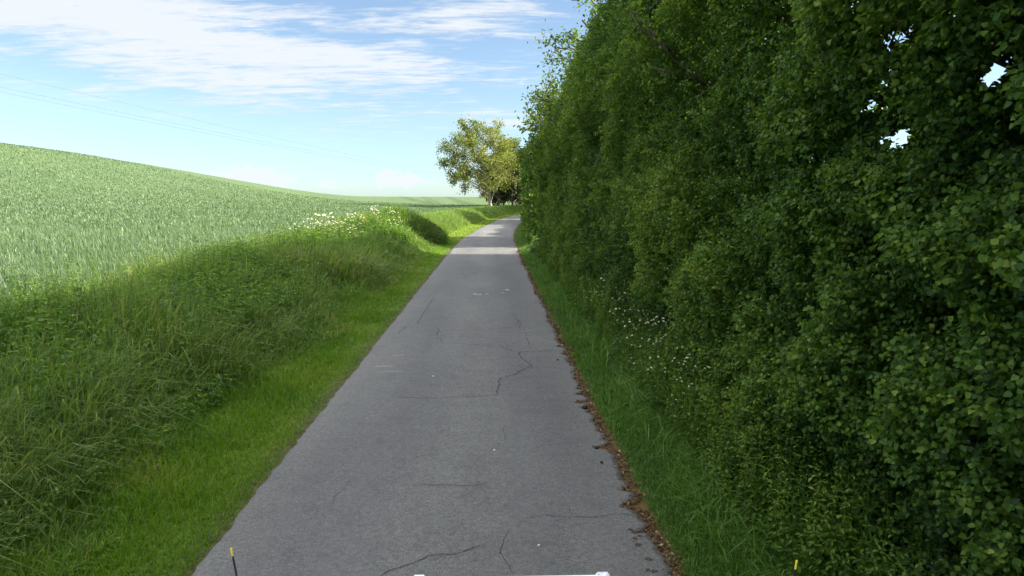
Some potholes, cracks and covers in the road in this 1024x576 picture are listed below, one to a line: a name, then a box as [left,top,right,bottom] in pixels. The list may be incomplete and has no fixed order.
crack [498,505,658,573]
crack [401,301,561,398]
